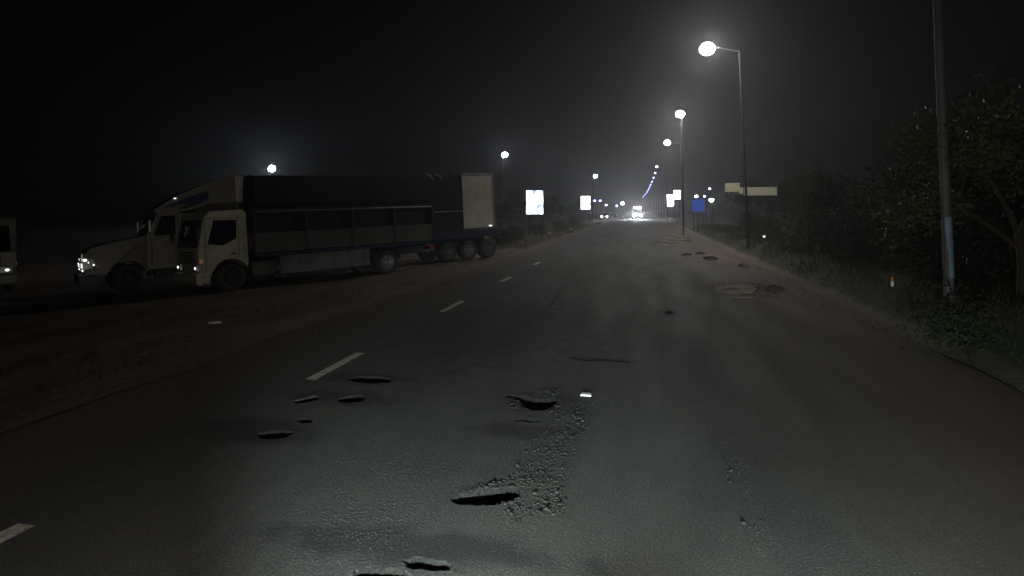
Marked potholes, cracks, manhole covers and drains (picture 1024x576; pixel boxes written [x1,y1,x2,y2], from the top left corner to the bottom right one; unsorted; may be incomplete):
pothole [256,430,295,439]
pothole [337,395,367,403]
pothole [503,395,558,411]
pothole [348,376,393,384]
pothole [350,566,412,576]
pothole [764,285,785,294]
pothole [291,395,320,404]
pothole [402,556,452,571]
pothole [451,486,520,506]
